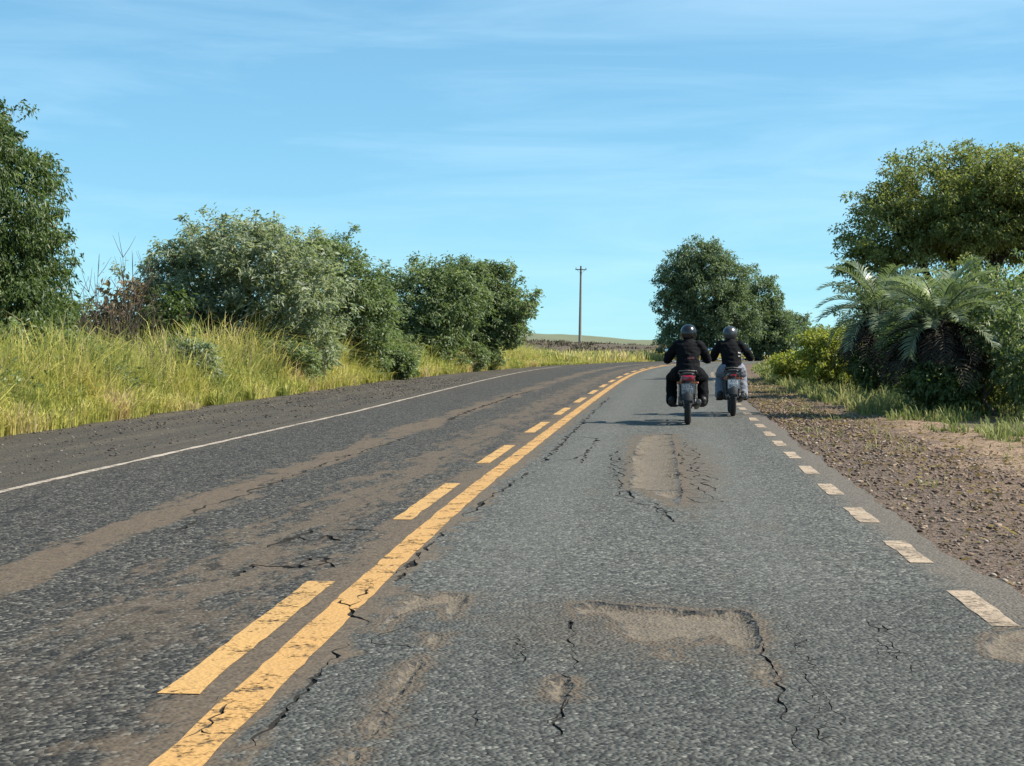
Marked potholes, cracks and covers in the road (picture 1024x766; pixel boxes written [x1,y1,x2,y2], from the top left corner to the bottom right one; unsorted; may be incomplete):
pothole [378,593,469,631]
pothole [628,434,684,506]
crack [759,624,846,751]
crack [239,399,724,753]
crack [859,621,926,673]
pothole [569,601,763,652]
